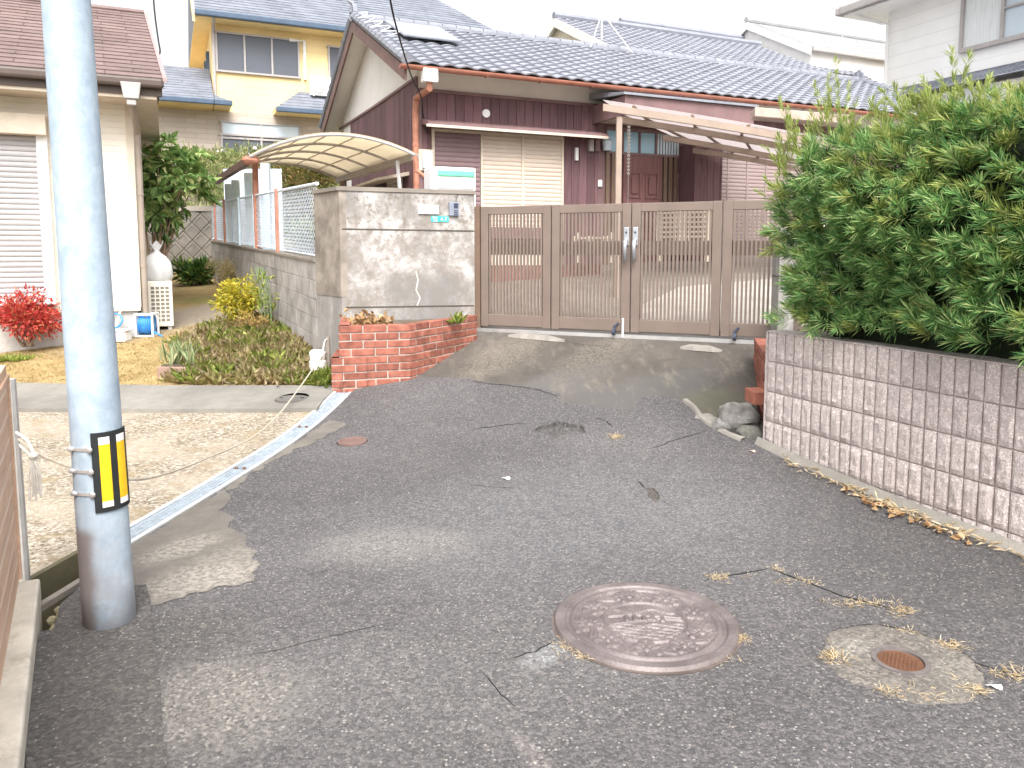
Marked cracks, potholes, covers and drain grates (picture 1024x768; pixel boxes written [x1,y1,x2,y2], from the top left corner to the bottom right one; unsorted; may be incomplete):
drain grate [130,391,351,544]
crack [705,568,909,615]
crack [484,640,555,704]
pothole [637,480,670,505]
manhole cover [552,582,743,676]
manhole cover [337,436,367,446]
manhole cover [275,395,308,403]
